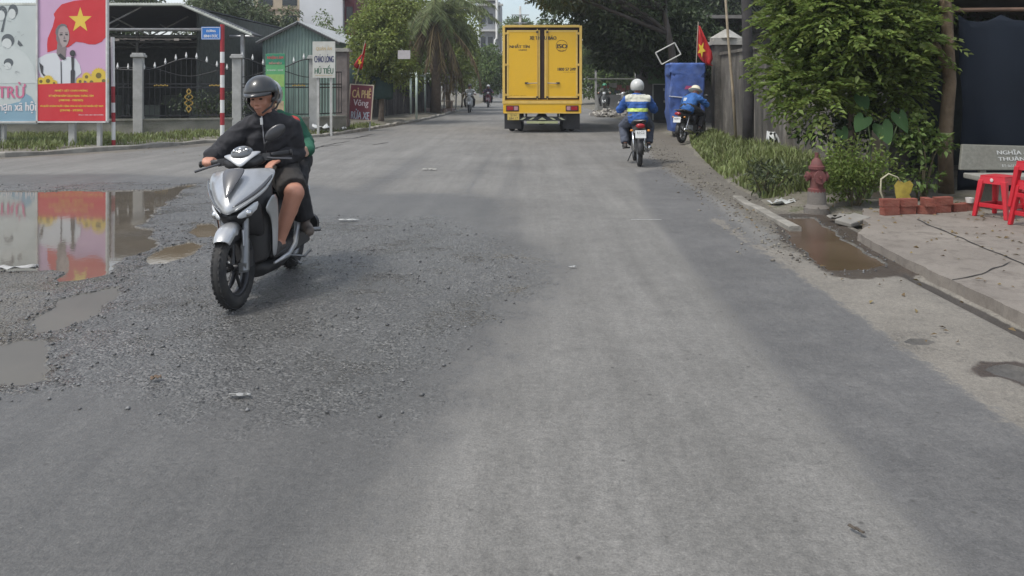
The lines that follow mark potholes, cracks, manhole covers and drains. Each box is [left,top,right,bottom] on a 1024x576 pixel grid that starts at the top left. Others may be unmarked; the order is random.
pothole [186,222,220,237]
pothole [0,338,51,385]
pothole [0,184,197,282]
pothole [144,240,207,265]
pothole [27,286,122,334]
pothole [775,217,889,271]
